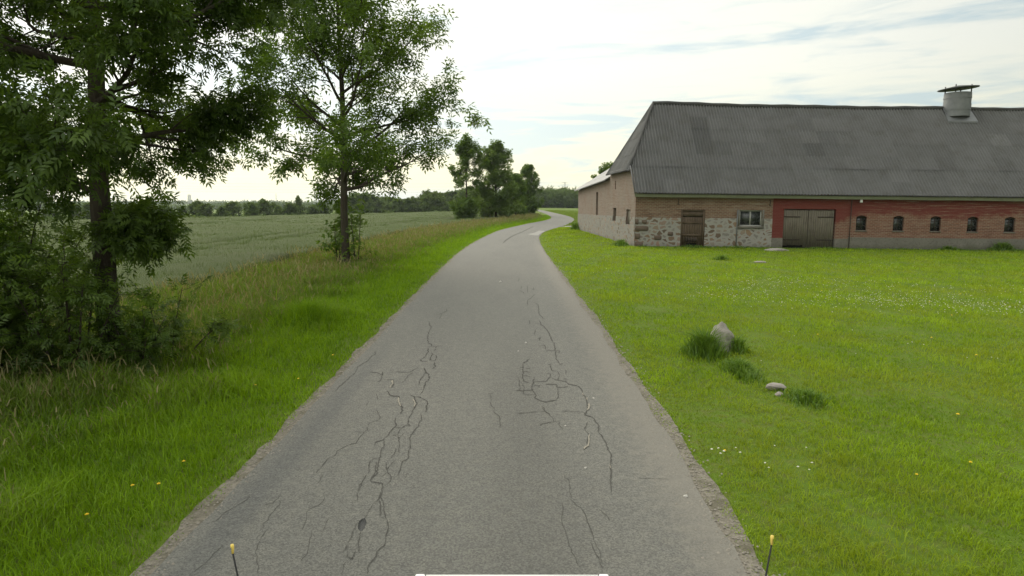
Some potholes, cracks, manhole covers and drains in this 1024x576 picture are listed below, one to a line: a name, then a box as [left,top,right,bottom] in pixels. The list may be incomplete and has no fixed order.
crack [561,474,610,566]
crack [316,322,438,574]
crack [516,280,612,491]
